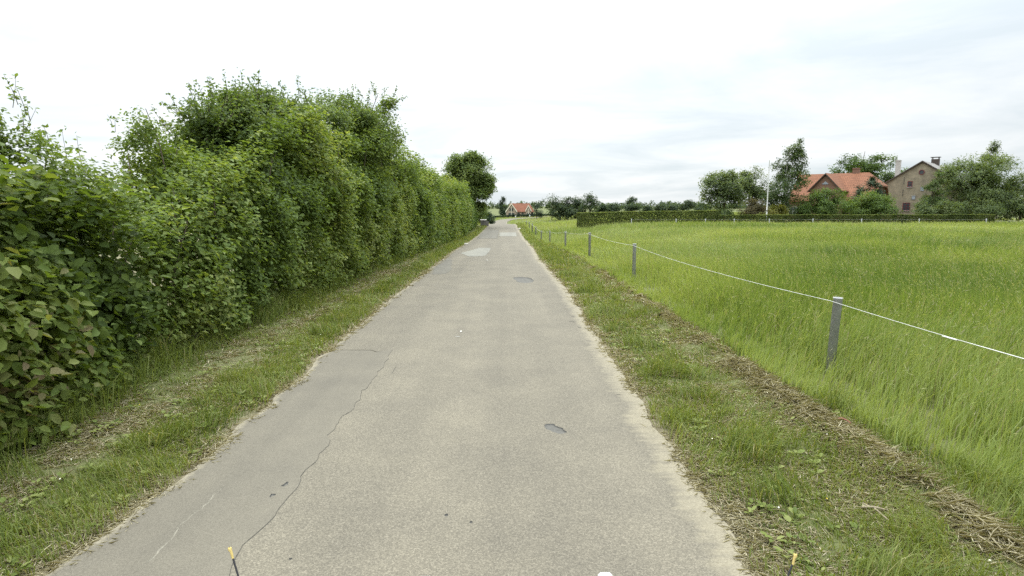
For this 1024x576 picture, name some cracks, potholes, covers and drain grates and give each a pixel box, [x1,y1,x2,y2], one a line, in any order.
crack [134,485,226,573]
crack [229,350,395,576]
pothole [544,424,567,434]
